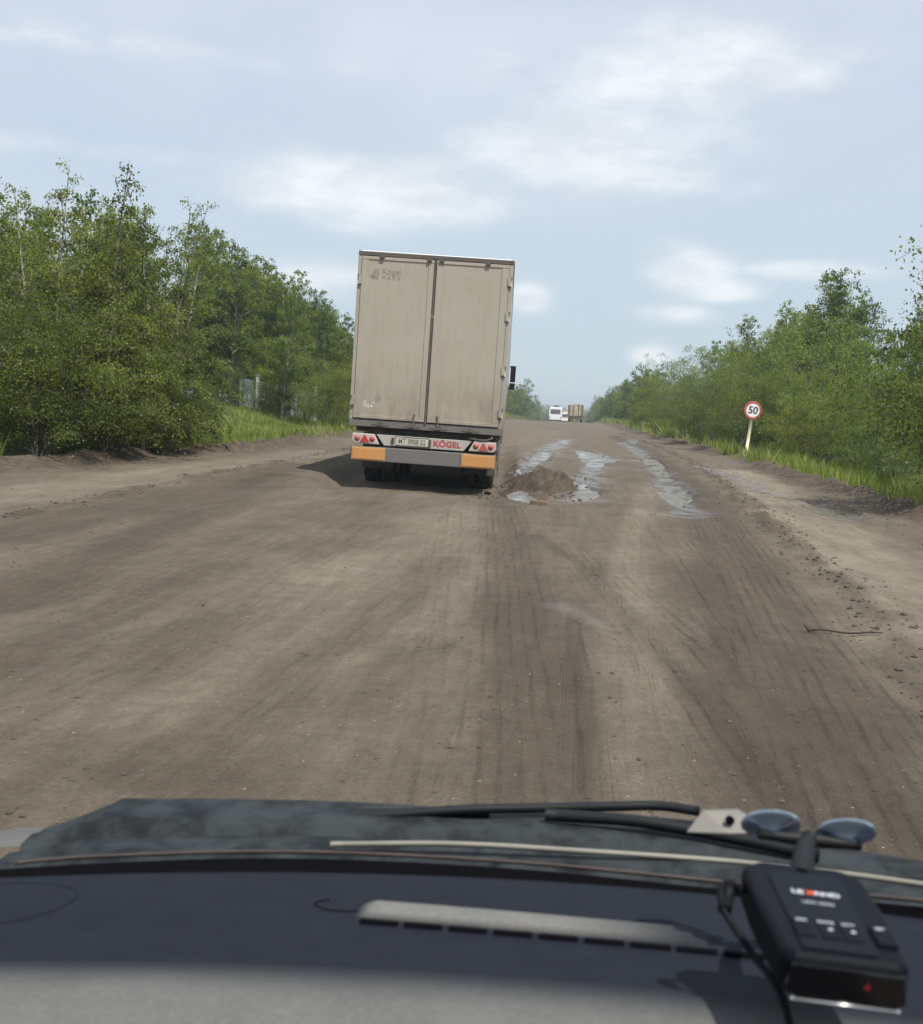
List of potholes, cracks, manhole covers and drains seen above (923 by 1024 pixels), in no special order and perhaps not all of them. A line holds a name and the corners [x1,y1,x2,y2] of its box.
pothole [571,449,631,468]
pothole [638,456,700,507]
pothole [511,448,556,476]
pothole [504,490,554,506]
pothole [563,476,612,502]
